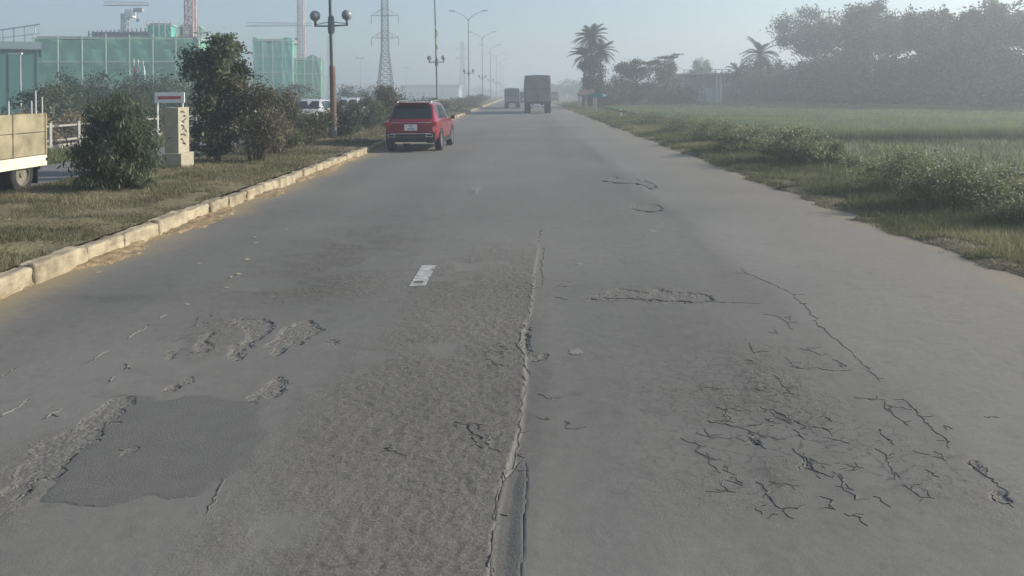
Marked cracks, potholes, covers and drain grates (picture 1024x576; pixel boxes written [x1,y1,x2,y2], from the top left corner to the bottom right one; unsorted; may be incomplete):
pothole [228,316,275,361]
pothole [584,288,714,304]
crack [681,314,946,526]
pothole [190,333,213,353]
pothole [265,320,325,356]
pothole [0,396,137,503]
crack [455,226,705,576]
pothole [604,179,657,188]
pothole [249,376,289,404]
